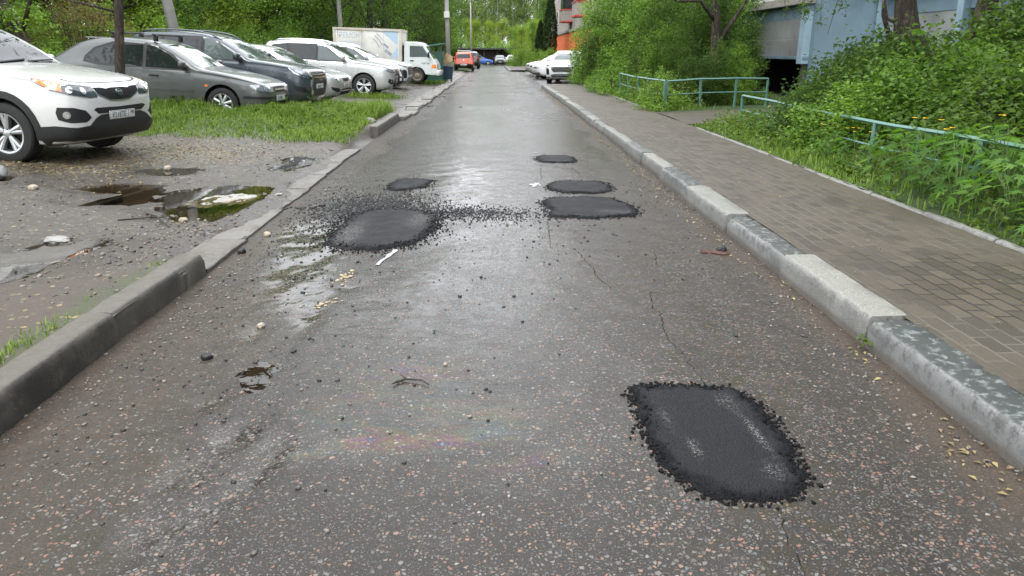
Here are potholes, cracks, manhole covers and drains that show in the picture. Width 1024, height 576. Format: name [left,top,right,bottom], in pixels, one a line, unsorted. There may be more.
crack [649,289,702,381]
pothole [239,363,278,394]
crack [780,507,806,576]
pothole [161,187,267,220]
pothole [73,185,166,206]
